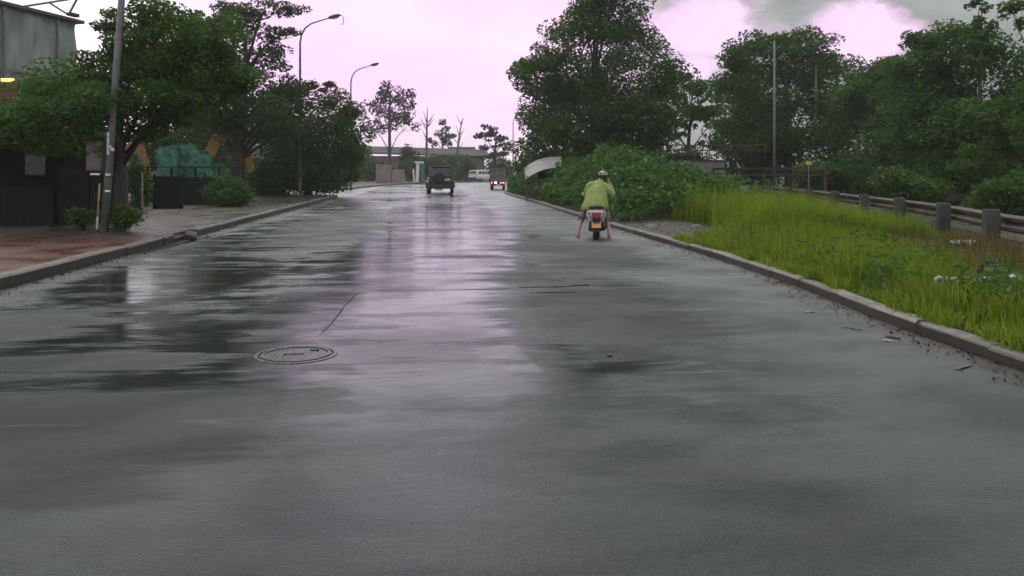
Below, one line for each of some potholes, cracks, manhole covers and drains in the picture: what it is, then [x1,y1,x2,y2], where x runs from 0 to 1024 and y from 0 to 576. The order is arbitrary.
manhole cover [254,345,338,364]
